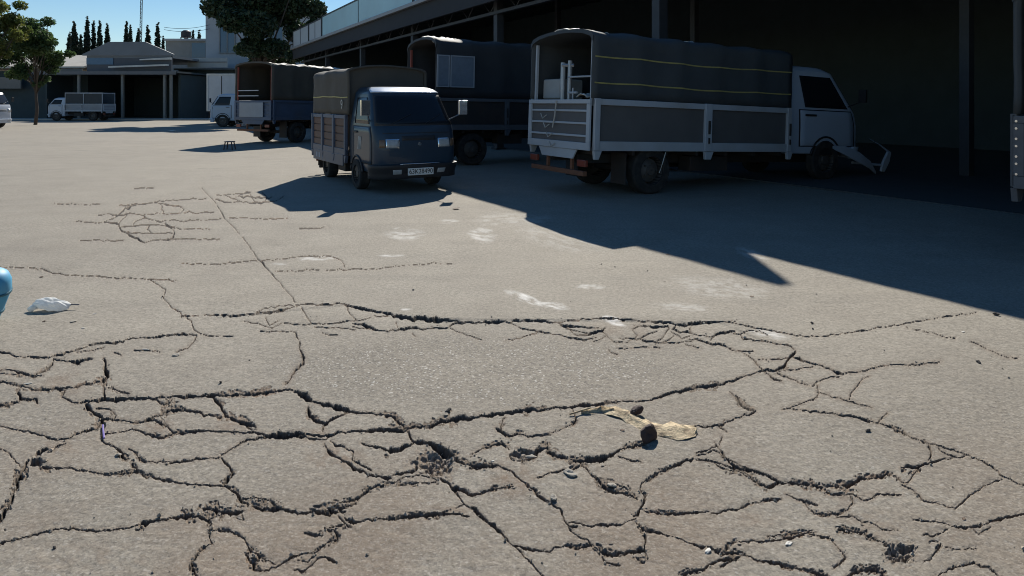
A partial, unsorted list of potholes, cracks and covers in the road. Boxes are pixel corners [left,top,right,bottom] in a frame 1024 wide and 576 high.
crack [182,255,452,273]
pothole [409,450,456,479]
crack [0,279,1024,576]
crack [0,266,176,282]
crack [54,187,323,244]
pothole [884,542,918,565]
